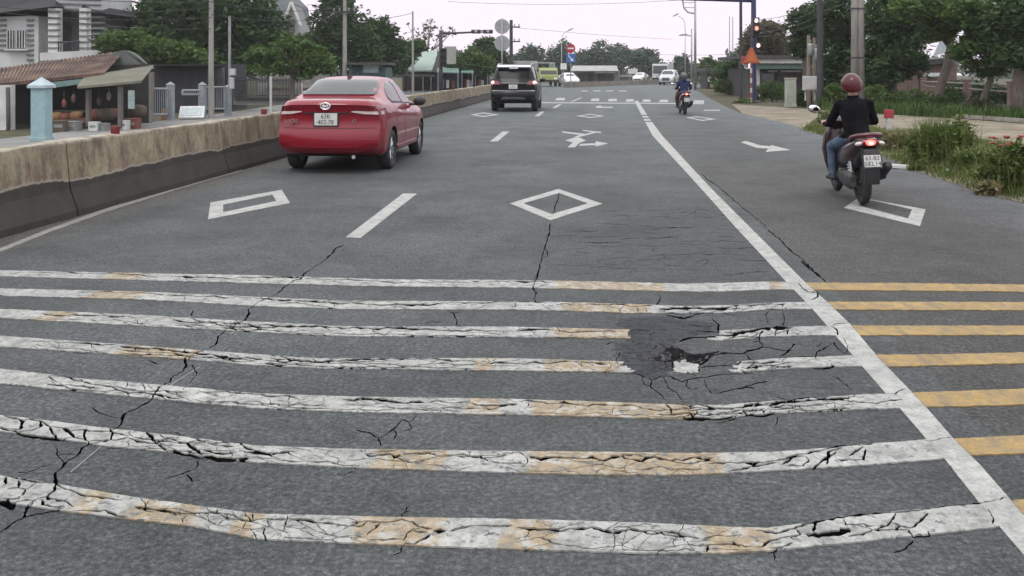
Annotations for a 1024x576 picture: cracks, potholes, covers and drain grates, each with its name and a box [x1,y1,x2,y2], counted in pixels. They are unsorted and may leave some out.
crack [0,194,981,560]
pothole [625,332,761,401]
